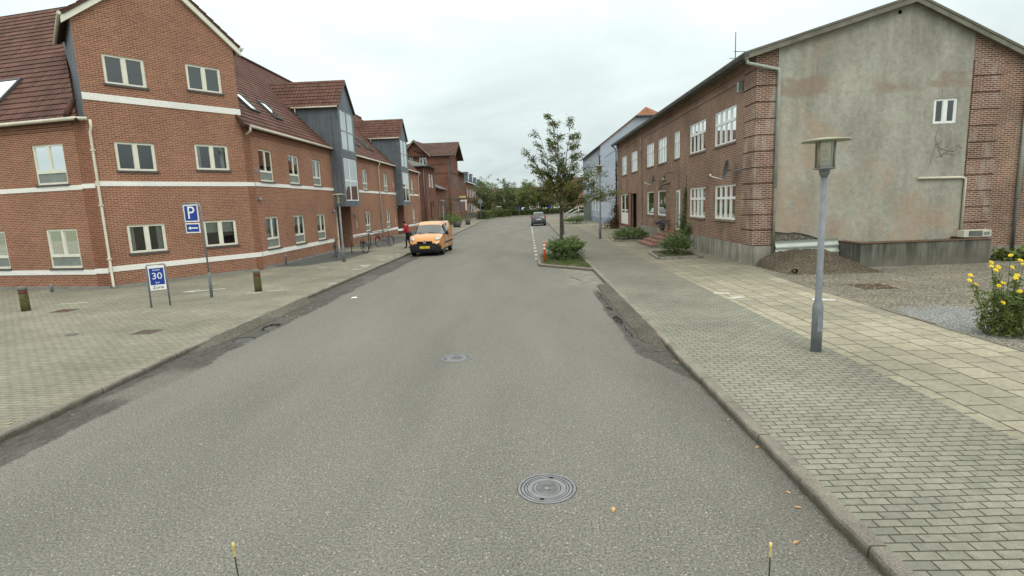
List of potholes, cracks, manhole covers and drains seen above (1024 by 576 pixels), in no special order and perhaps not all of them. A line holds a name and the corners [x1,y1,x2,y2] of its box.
manhole cover [517,473,576,504]
manhole cover [441,353,472,363]
